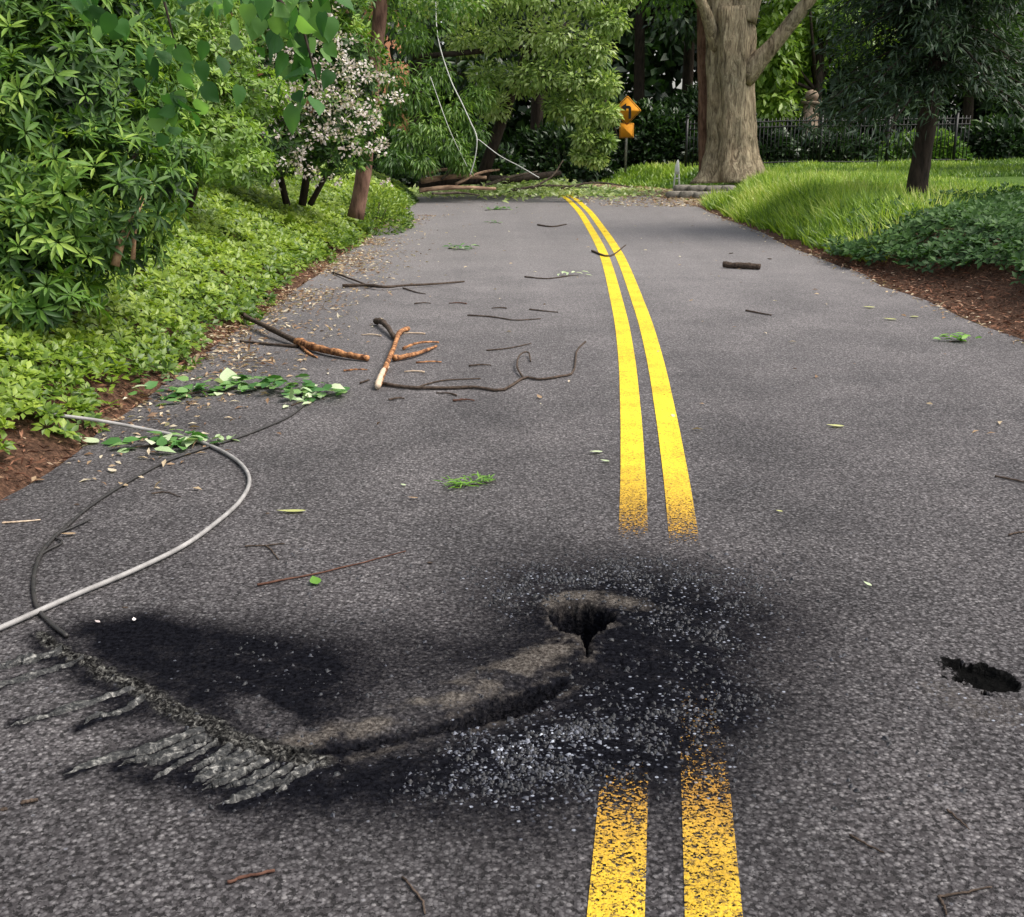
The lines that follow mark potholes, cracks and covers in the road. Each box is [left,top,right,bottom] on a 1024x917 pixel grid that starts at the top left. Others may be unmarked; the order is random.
pothole [937,656,1024,697]
crack [0,630,571,805]
pothole [542,600,621,663]
